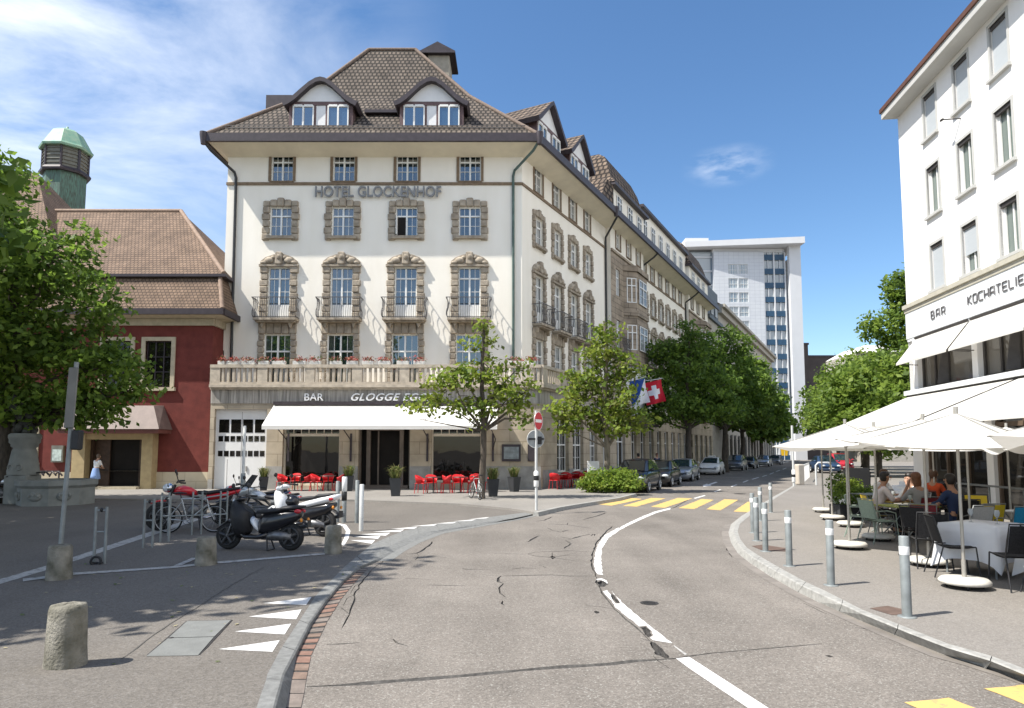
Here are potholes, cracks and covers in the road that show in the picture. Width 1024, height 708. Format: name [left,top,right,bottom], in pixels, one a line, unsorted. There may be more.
manhole cover [147,620,232,656]
crack [307,512,816,687]
